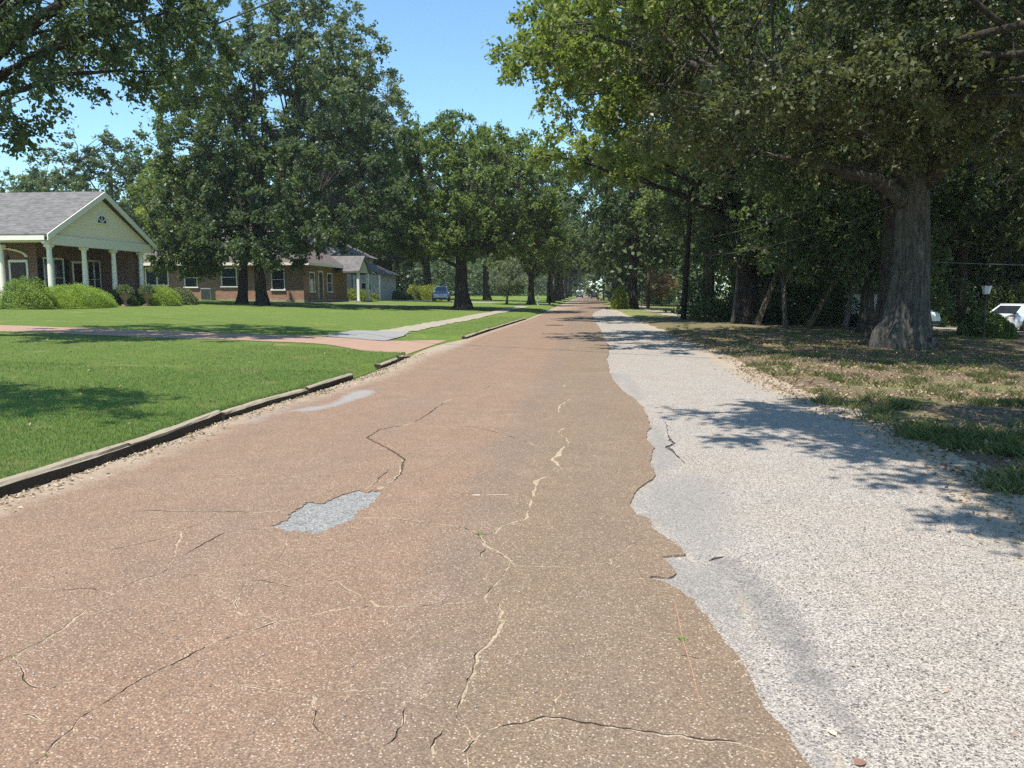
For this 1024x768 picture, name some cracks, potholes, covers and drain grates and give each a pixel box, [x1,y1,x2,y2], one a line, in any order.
pothole [271,490,382,534]
crack [14,382,775,767]
